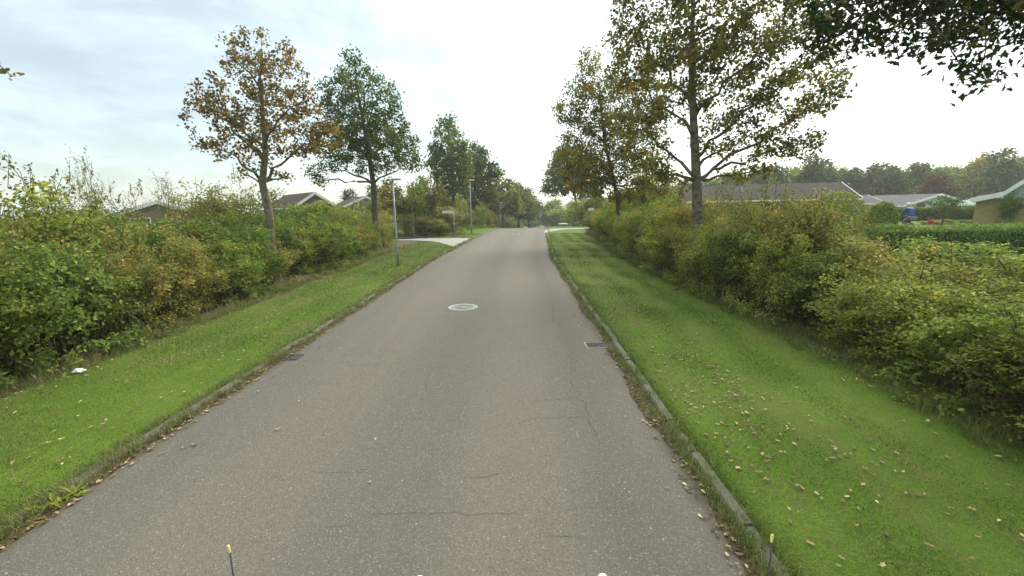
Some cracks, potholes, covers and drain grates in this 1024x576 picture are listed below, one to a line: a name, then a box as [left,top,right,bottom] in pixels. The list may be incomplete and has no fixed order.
crack [311,512,512,529]
